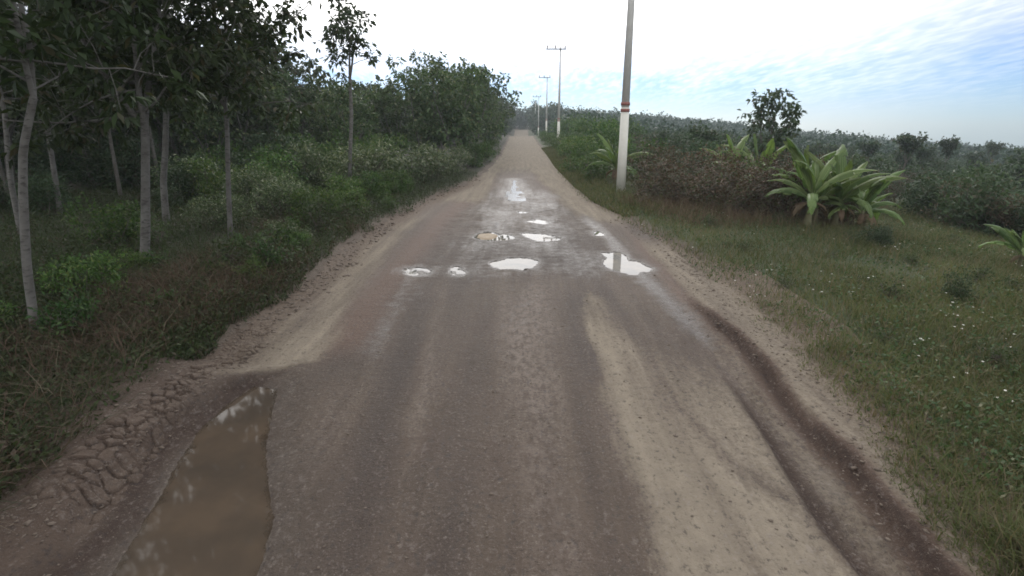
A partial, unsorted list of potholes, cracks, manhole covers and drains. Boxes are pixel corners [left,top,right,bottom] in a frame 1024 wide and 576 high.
pothole [480,255,549,272]
pothole [76,371,302,576]
pothole [439,263,477,279]
pothole [466,230,522,244]
pothole [393,264,440,278]
pothole [513,232,570,243]
pothole [520,218,556,226]
pothole [592,249,663,277]
